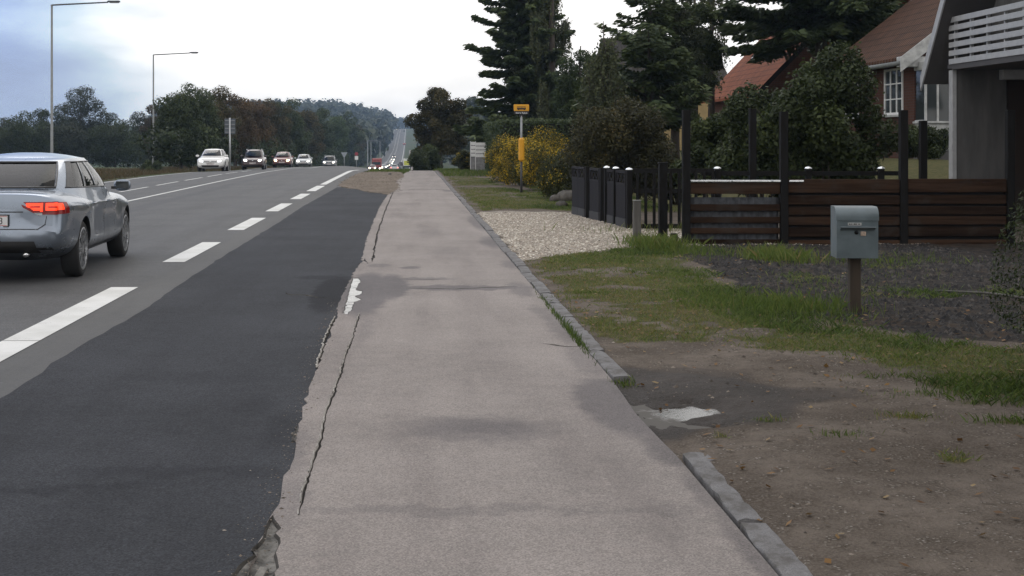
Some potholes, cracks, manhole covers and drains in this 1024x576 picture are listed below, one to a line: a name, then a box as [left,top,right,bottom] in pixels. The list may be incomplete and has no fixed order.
crack [297,313,360,514]
